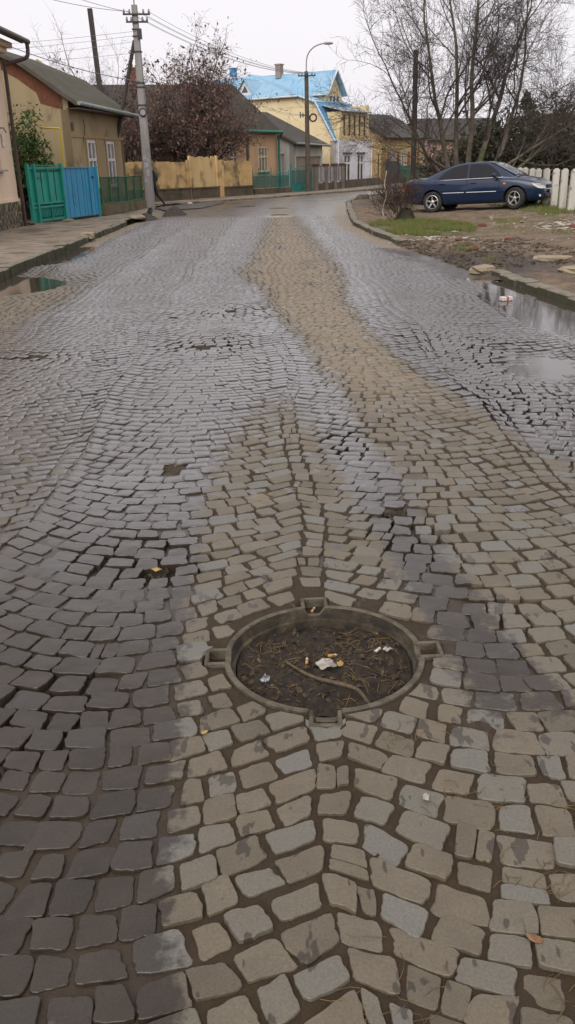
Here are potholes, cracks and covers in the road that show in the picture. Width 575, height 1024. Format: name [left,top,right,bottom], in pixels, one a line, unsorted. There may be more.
pothole [147,568,169,579]
pothole [163,466,191,476]
manhole cover [204,597,444,728]
